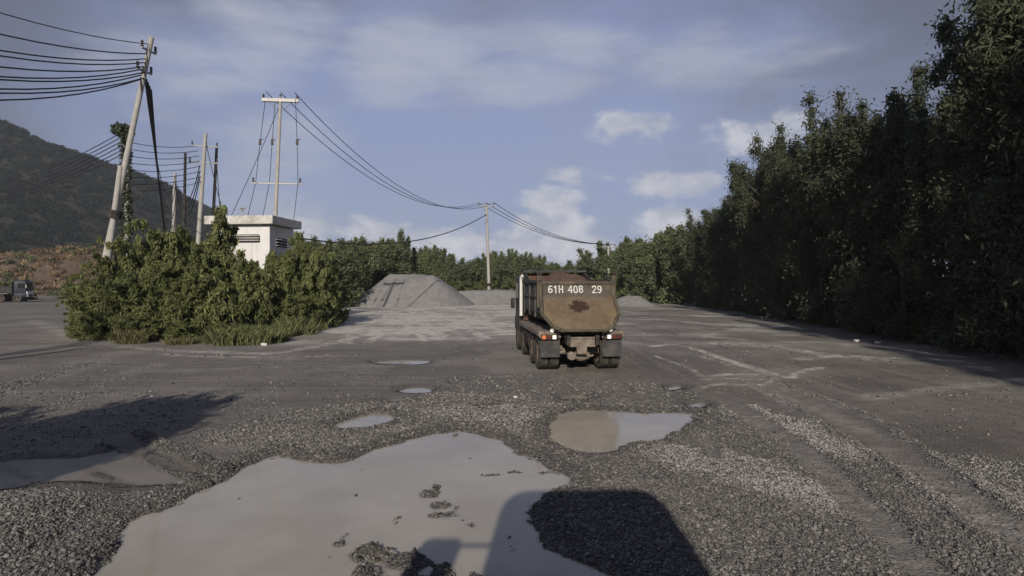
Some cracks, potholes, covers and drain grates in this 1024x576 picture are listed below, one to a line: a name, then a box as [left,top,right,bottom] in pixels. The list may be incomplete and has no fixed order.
pothole [70,428,622,576]
pothole [663,383,688,391]
pothole [396,385,437,396]
pothole [542,406,701,454]
pothole [326,409,397,428]
pothole [683,400,713,408]
pothole [0,443,225,490]
